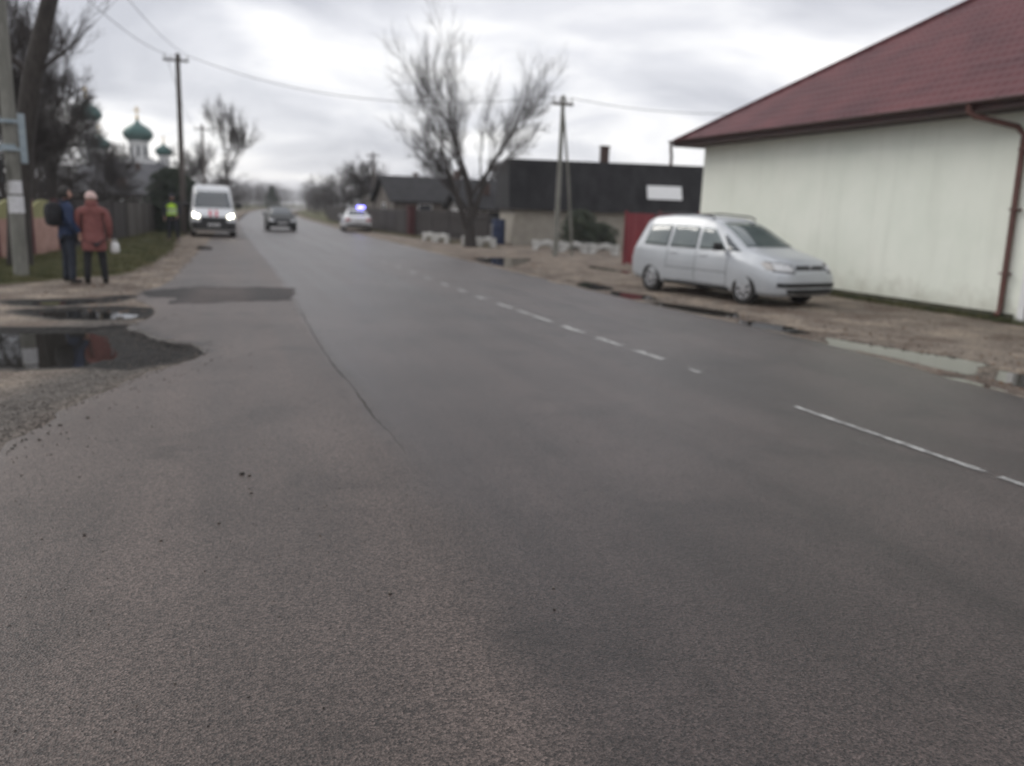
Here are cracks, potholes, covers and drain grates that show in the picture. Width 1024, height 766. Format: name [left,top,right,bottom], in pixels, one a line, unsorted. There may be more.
pothole [14,306,154,320]
pothole [0,325,203,369]
crack [299,308,404,449]
